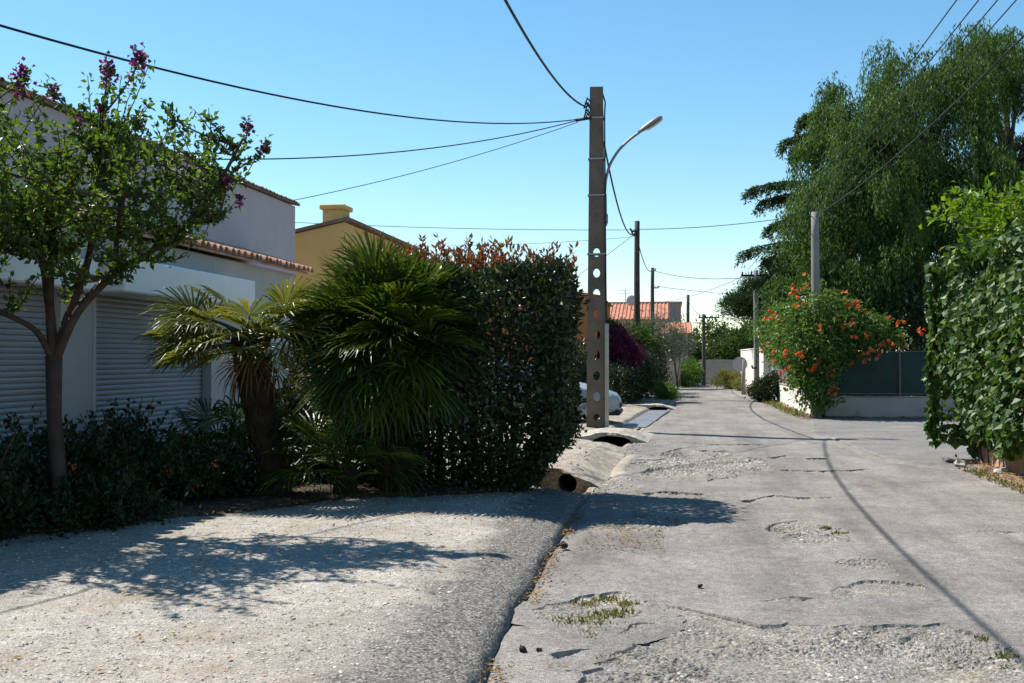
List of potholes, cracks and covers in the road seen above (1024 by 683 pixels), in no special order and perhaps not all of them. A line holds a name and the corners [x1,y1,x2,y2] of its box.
pothole [815,555,912,574]
pothole [810,576,949,603]
crack [532,644,603,668]
pothole [510,587,686,644]
pothole [751,519,868,548]
pothole [550,603,1024,683]
crack [657,442,884,474]
pothole [630,448,786,483]
